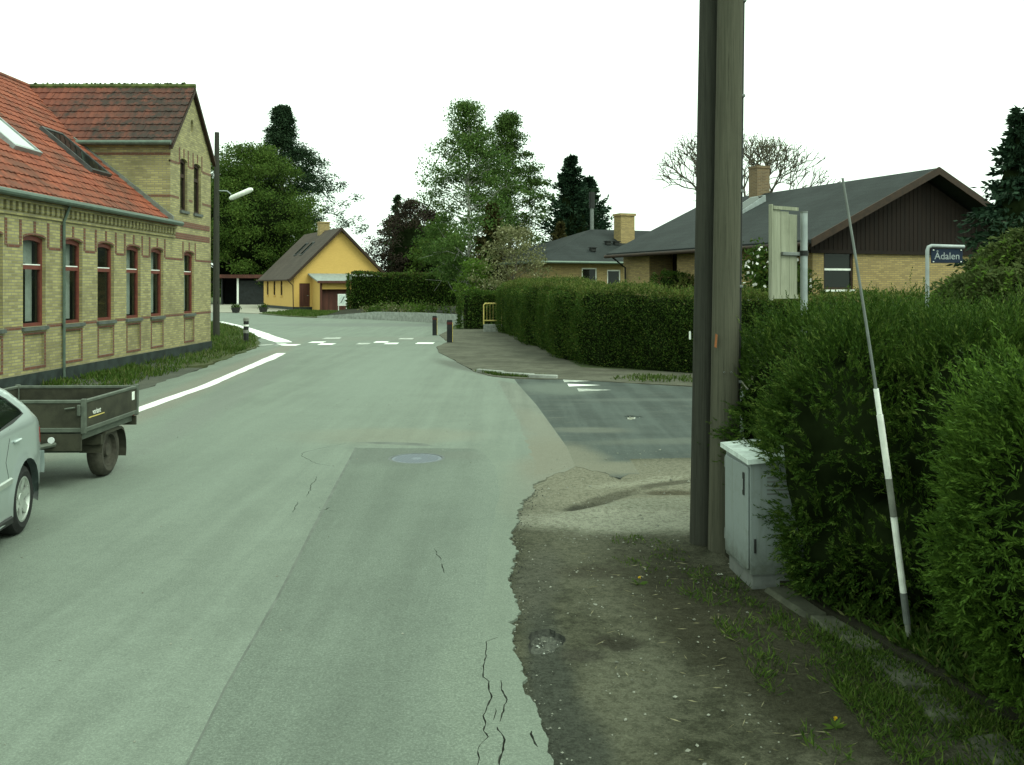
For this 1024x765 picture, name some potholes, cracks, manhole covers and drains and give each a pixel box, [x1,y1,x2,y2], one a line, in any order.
crack [477,637,508,765]
pothole [528,629,566,654]
manhole cover [388,453,445,464]
